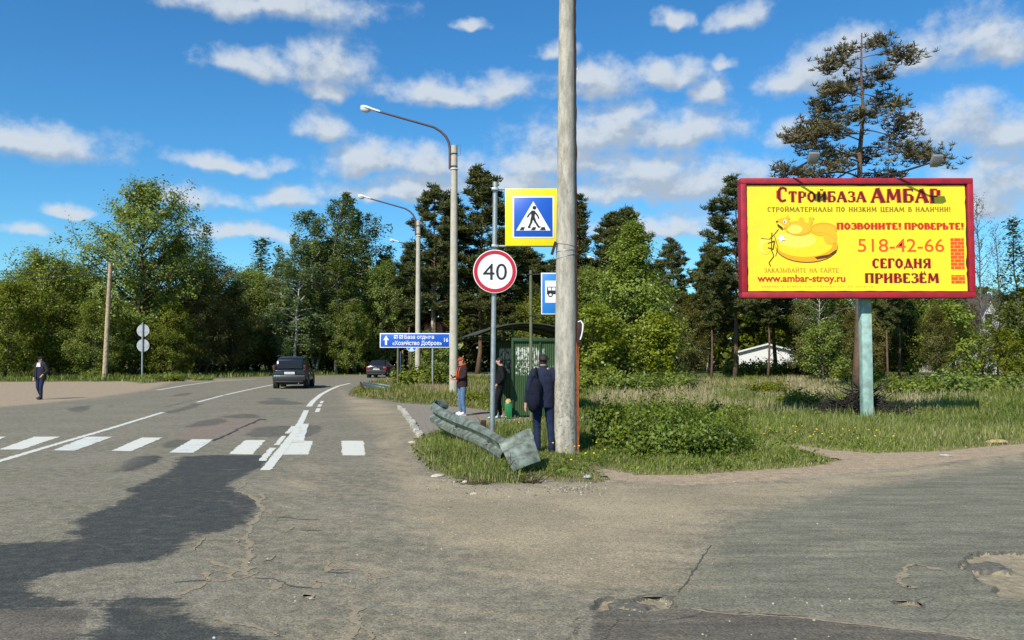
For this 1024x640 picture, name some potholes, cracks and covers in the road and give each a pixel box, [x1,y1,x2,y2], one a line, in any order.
crack [179,481,389,640]
pothole [930,546,1024,608]
pothole [563,587,703,622]
